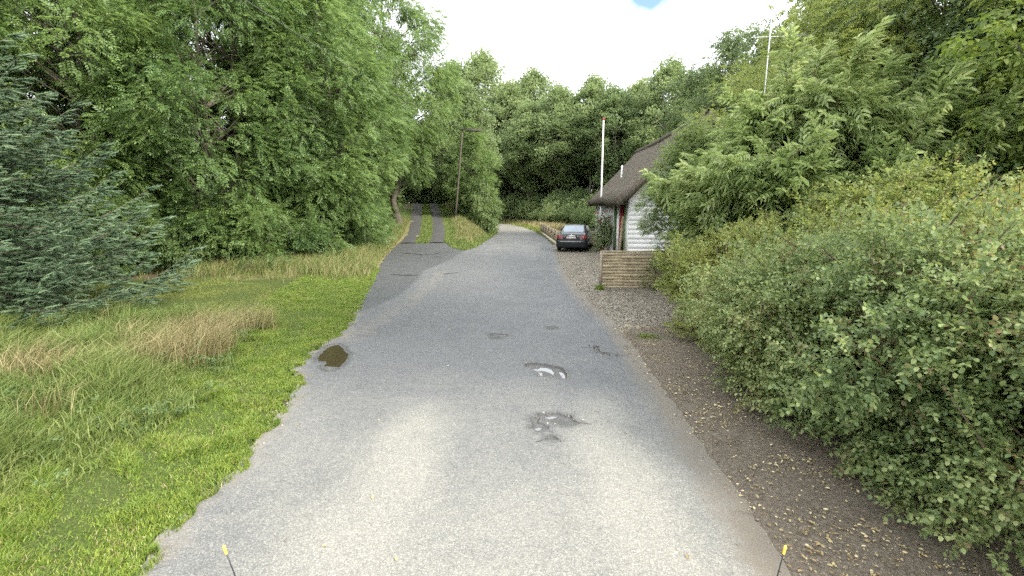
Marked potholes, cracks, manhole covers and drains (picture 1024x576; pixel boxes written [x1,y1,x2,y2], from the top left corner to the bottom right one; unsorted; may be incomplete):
pothole [530,417,549,432]
pothole [525,363,568,379]
pothole [313,344,350,371]
pothole [537,413,580,426]
